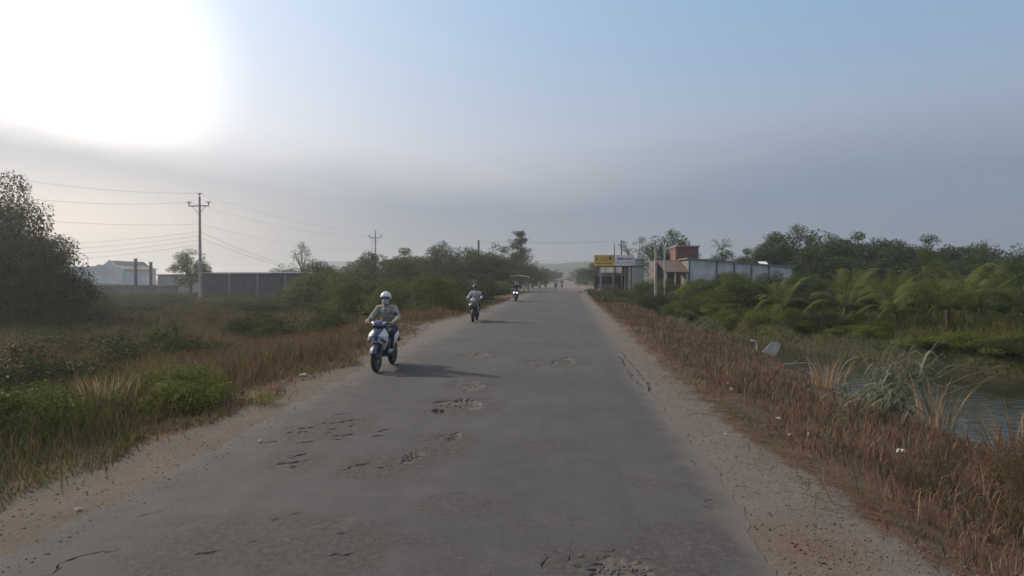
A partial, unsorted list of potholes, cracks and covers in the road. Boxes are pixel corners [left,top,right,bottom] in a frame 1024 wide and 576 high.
crack [45,550,116,576]
pothole [586,555,657,576]
pothole [436,432,462,442]
pothole [432,398,485,410]
crack [617,355,643,387]
pothole [400,451,425,465]
pothole [454,380,485,391]
